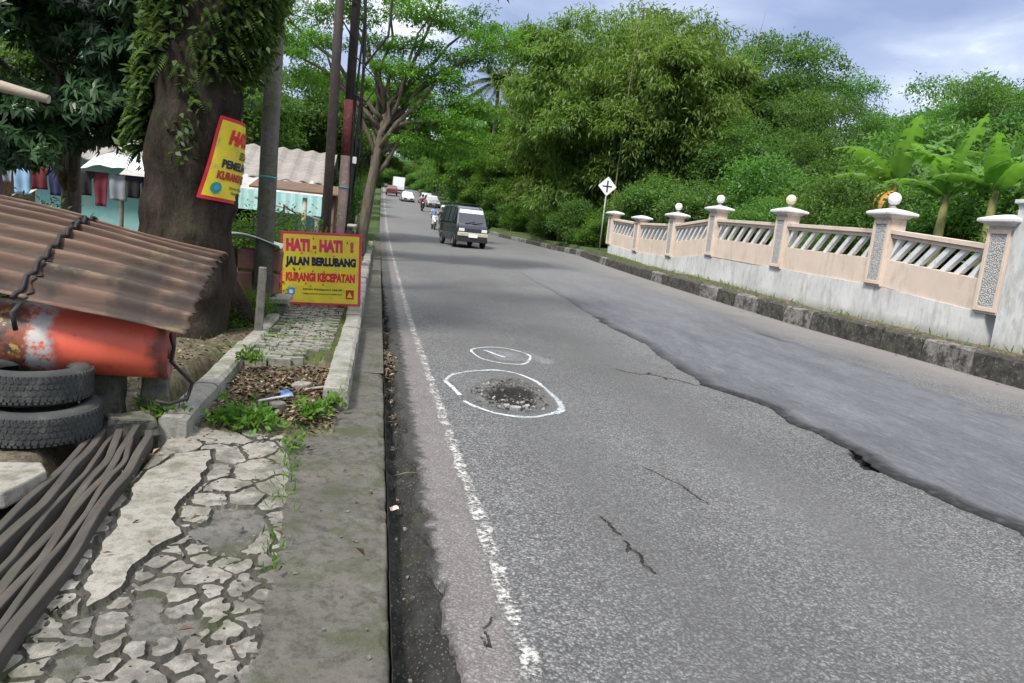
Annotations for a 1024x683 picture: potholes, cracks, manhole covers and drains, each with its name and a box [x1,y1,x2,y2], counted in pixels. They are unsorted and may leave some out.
crack [644,467,708,503]
crack [599,516,656,574]
crack [616,369,697,386]
pothole [471,378,549,413]
crack [480,617,493,648]
